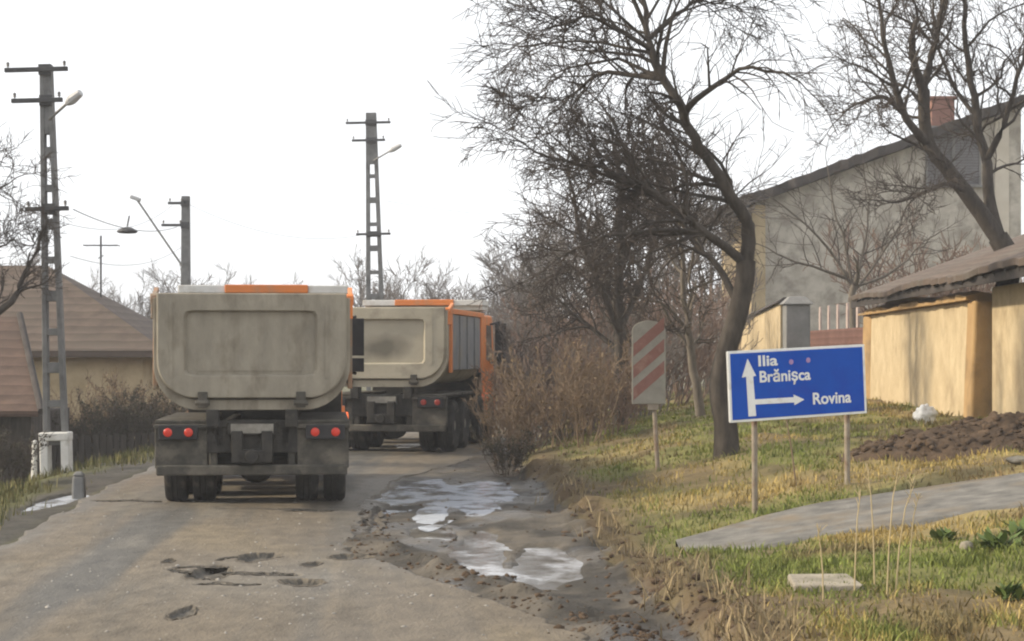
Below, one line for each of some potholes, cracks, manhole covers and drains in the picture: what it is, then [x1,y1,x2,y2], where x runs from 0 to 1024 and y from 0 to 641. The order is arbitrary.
pothole [182,564,235,580]
pothole [277,578,329,587]
pothole [235,552,285,563]
pothole [166,605,198,620]
